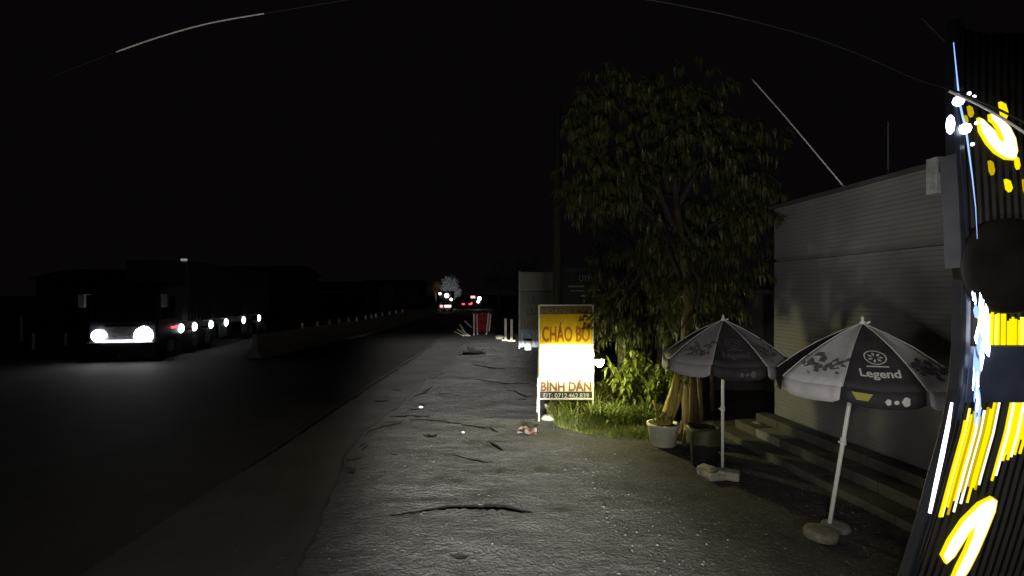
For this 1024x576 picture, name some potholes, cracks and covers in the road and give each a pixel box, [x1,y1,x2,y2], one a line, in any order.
crack [470,363,534,400]
crack [389,501,534,516]
pothole [448,551,471,559]
crack [240,343,504,473]
